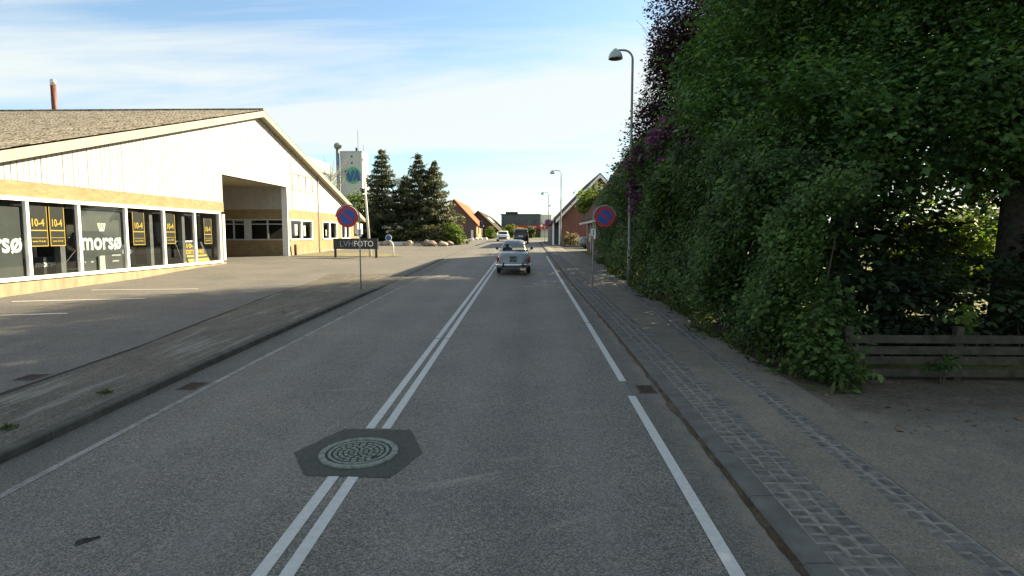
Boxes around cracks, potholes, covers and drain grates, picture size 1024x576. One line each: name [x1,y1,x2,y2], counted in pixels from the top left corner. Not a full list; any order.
drain grate [635,385,658,394]
drain grate [175,382,209,390]
manhole cover [318,437,399,469]
